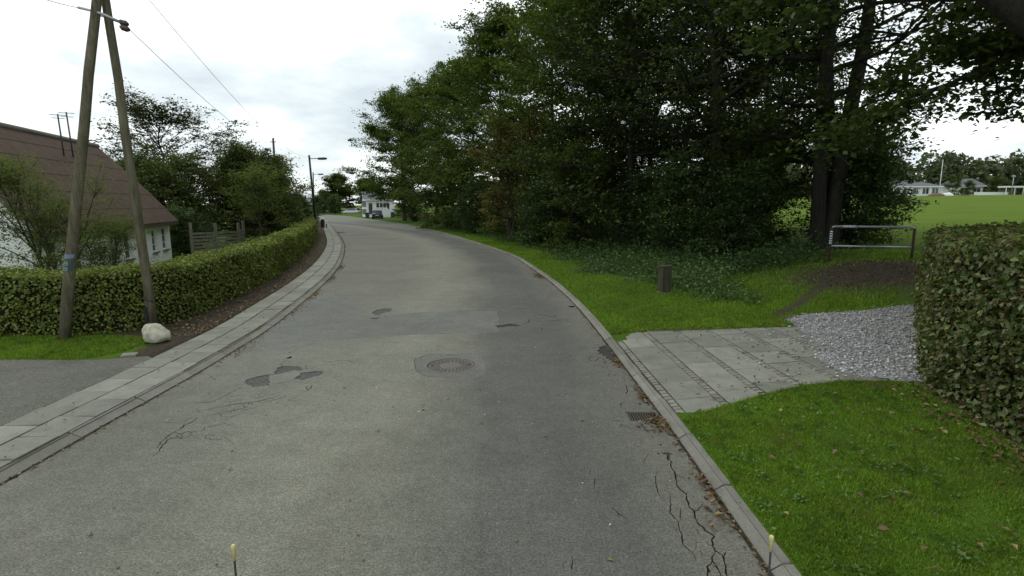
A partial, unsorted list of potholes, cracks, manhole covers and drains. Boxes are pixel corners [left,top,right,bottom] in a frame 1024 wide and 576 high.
crack [589,342,728,576]
crack [153,348,351,456]
manhole cover [424,358,477,373]
drain grate [625,412,661,421]
